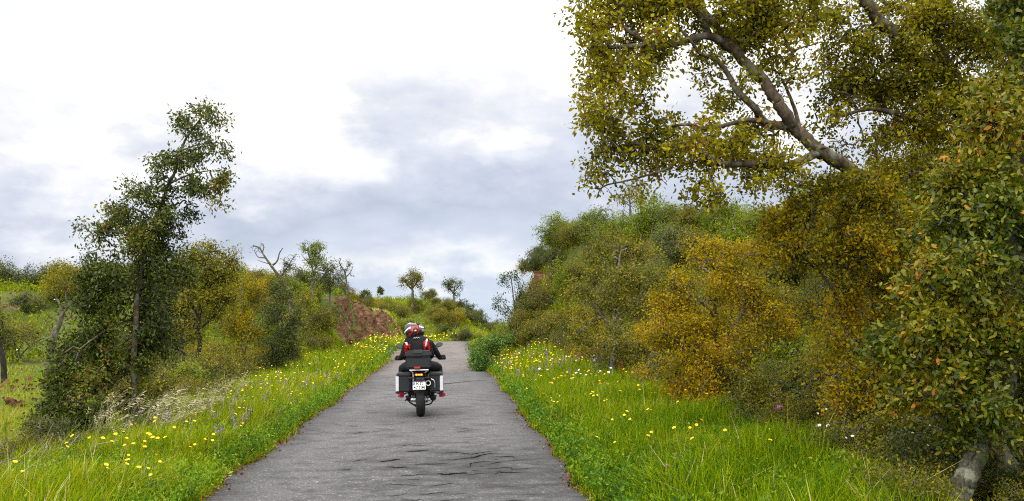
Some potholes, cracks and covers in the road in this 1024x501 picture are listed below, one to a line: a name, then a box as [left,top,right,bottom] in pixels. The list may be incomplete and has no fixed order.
crack [342,444,528,501]
